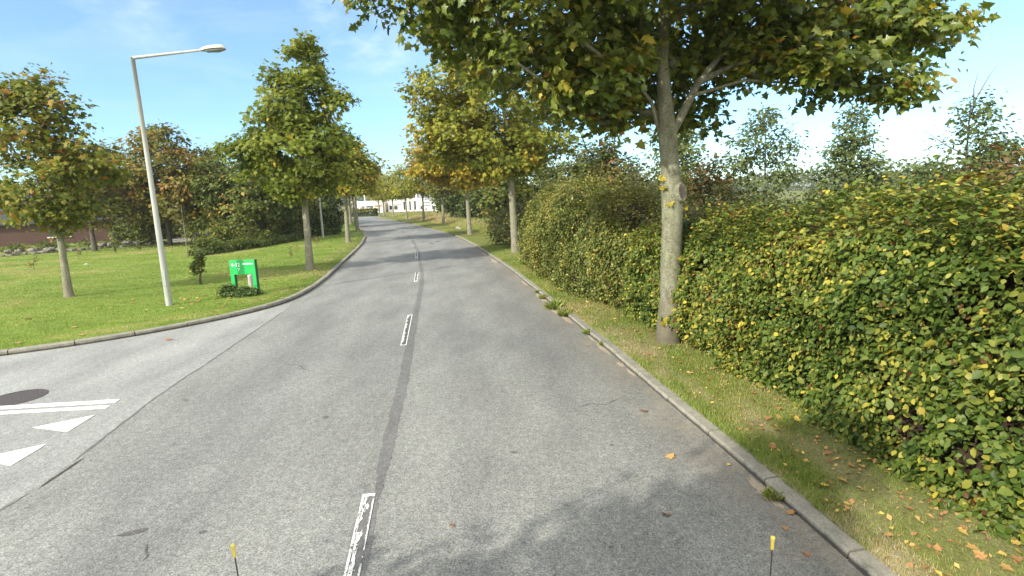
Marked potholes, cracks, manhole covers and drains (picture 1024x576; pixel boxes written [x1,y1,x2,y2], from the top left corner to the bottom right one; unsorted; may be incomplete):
manhole cover [0,389,49,406]
